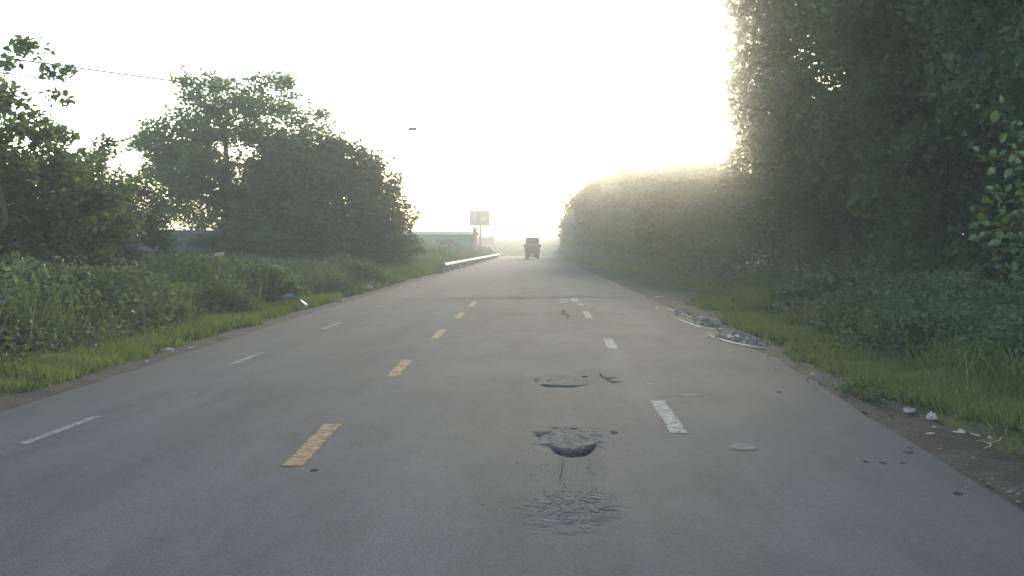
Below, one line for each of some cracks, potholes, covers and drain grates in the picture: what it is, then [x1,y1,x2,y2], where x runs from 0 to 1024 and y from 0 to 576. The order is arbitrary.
crack [495,460,650,545]
crack [526,296,632,318]
pothole [525,375,598,389]
pothole [519,423,628,461]
